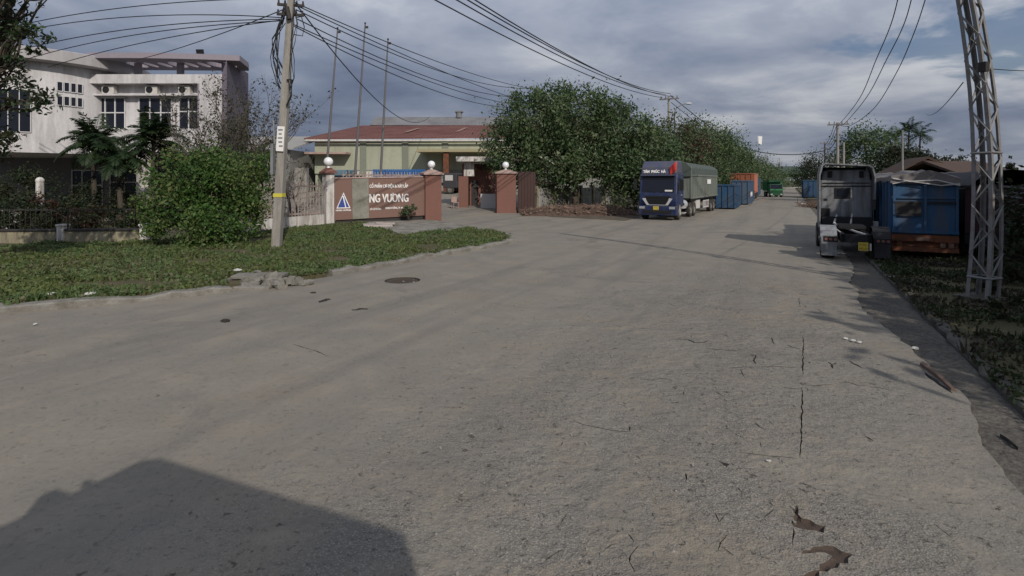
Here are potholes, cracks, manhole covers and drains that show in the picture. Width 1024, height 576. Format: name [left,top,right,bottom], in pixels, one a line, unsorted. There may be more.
pothole [791,506,826,533]
pothole [802,546,853,576]
